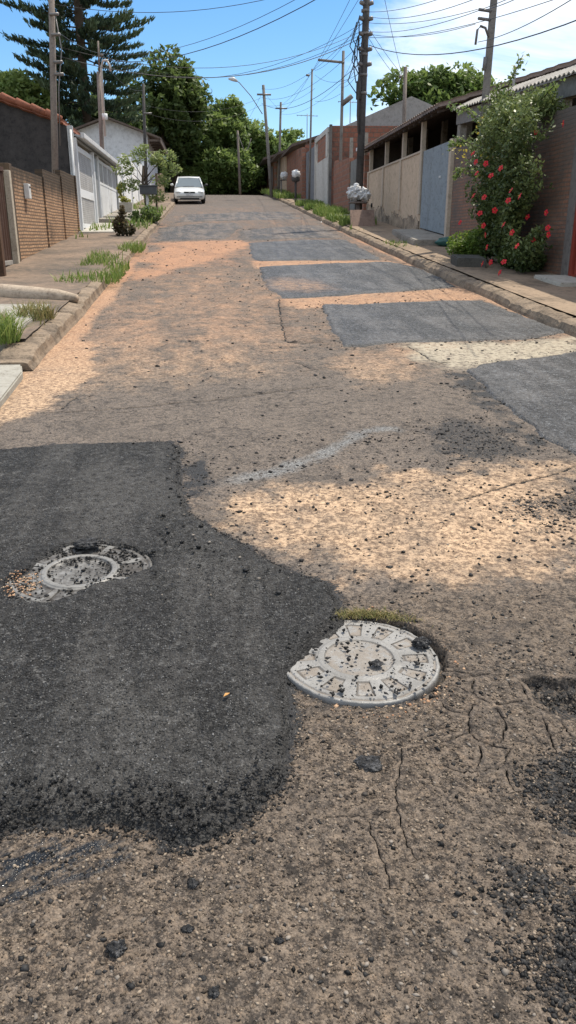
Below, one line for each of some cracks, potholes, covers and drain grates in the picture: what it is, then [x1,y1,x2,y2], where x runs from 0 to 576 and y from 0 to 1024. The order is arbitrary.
manhole cover [5,545,152,603]
manhole cover [287,620,440,709]
crack [447,464,576,505]
crack [326,668,576,889]
